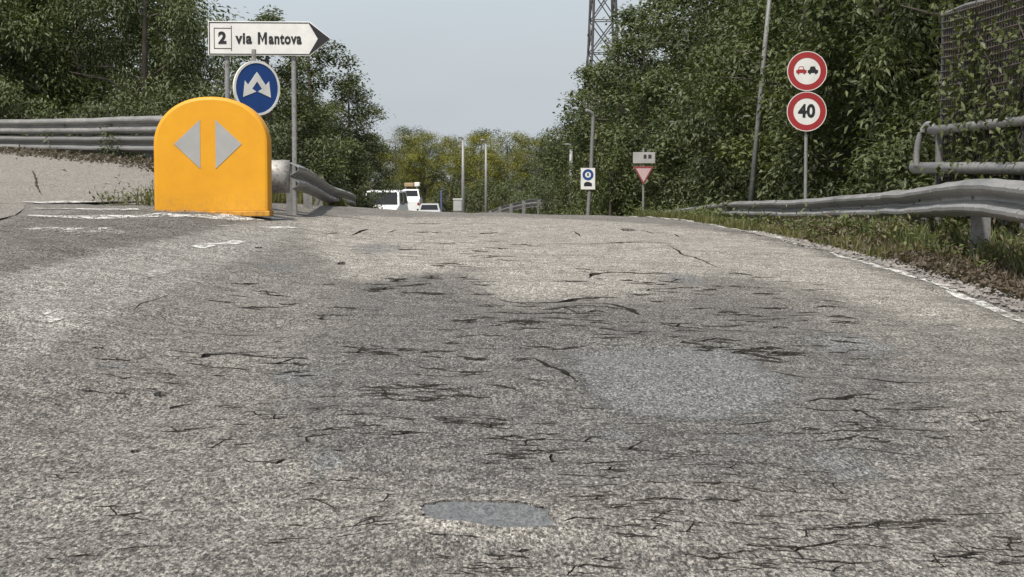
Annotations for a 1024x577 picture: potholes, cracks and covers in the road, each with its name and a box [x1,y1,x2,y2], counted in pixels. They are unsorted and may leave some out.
crack [1,169,66,195]
crack [76,223,1024,572]
crack [11,471,157,559]
